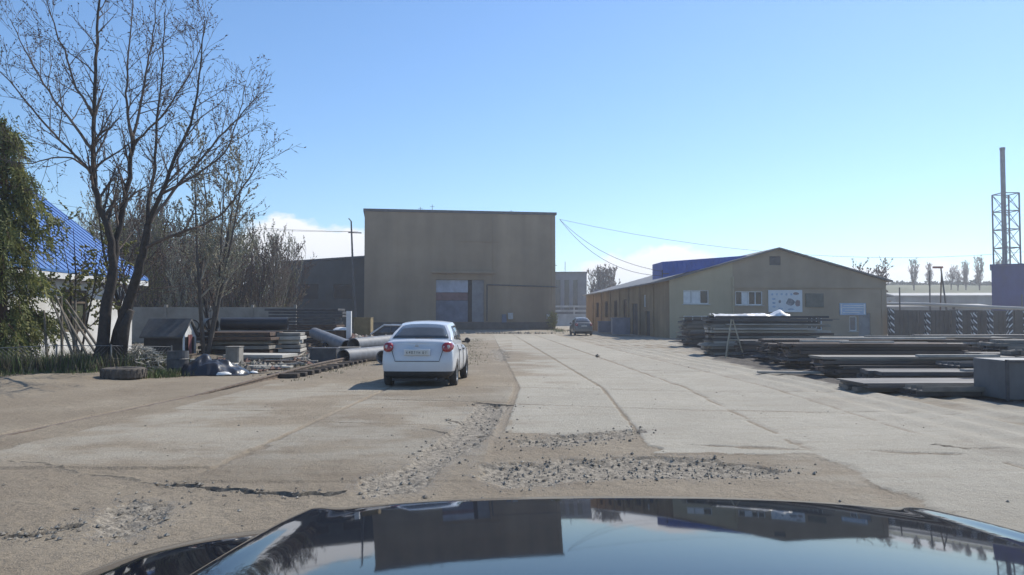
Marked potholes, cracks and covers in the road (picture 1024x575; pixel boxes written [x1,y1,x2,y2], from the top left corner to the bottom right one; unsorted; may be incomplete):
pothole [90,501,172,540]
pothole [357,404,509,497]
pothole [476,456,783,489]
pothole [514,429,648,448]
crack [7,460,347,498]
